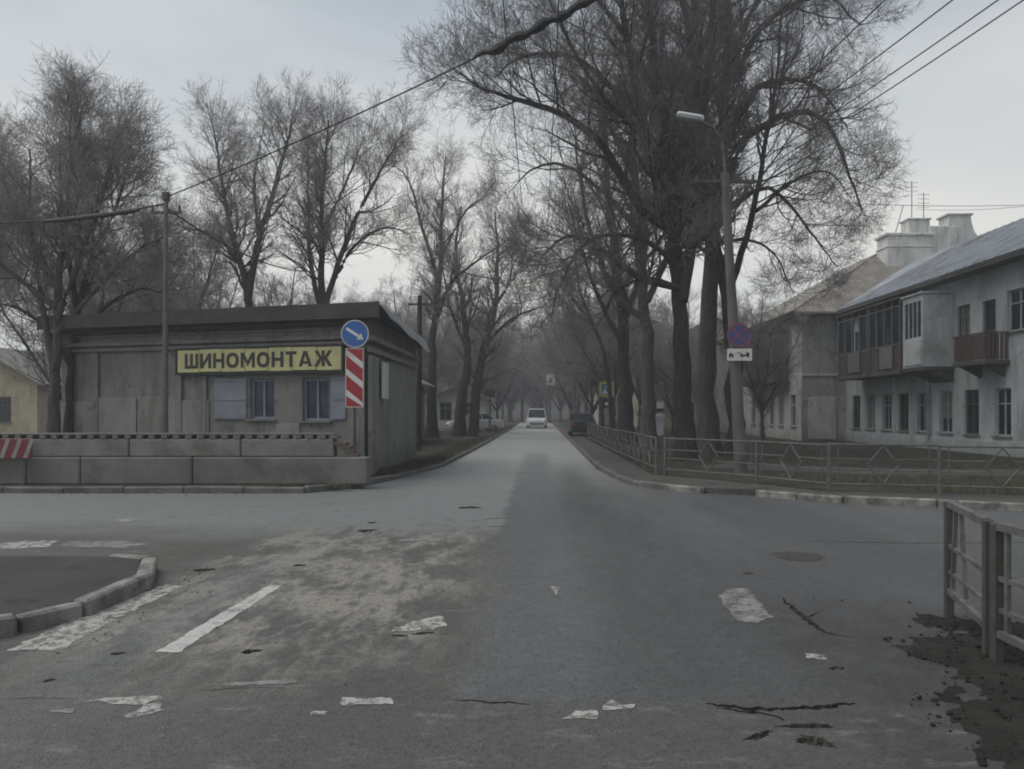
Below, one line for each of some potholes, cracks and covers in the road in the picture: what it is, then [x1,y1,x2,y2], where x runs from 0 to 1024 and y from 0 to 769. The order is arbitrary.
manhole cover [768,551,830,562]
crack [783,598,856,638]
crack [706,702,856,721]
pothole [794,734,838,748]
